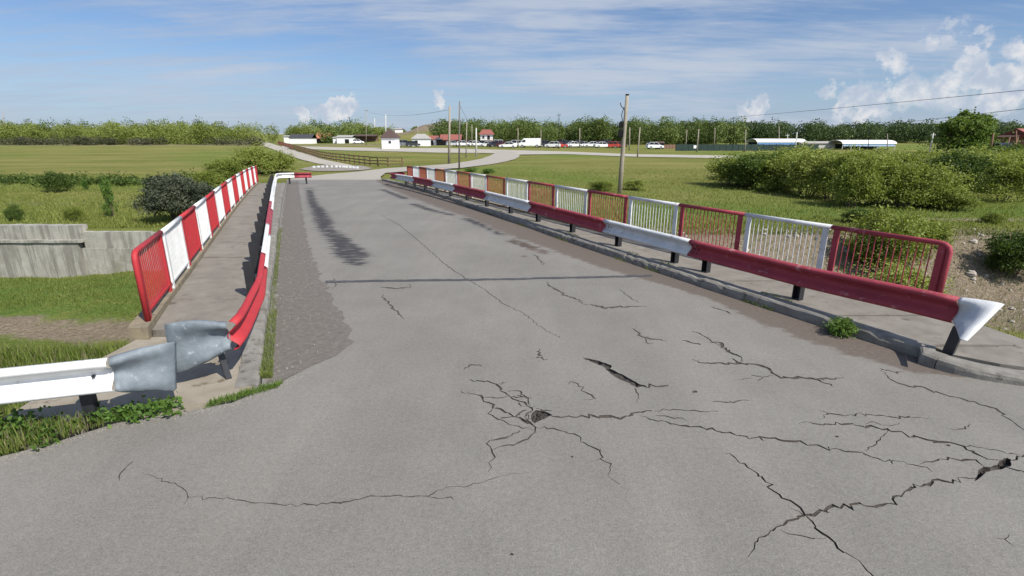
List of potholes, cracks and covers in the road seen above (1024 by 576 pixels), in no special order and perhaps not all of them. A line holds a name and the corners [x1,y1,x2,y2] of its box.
pothole [975,458,1011,481]
crack [118,364,1024,576]
crack [682,331,844,386]
pothole [531,410,552,423]
crack [381,215,560,360]
